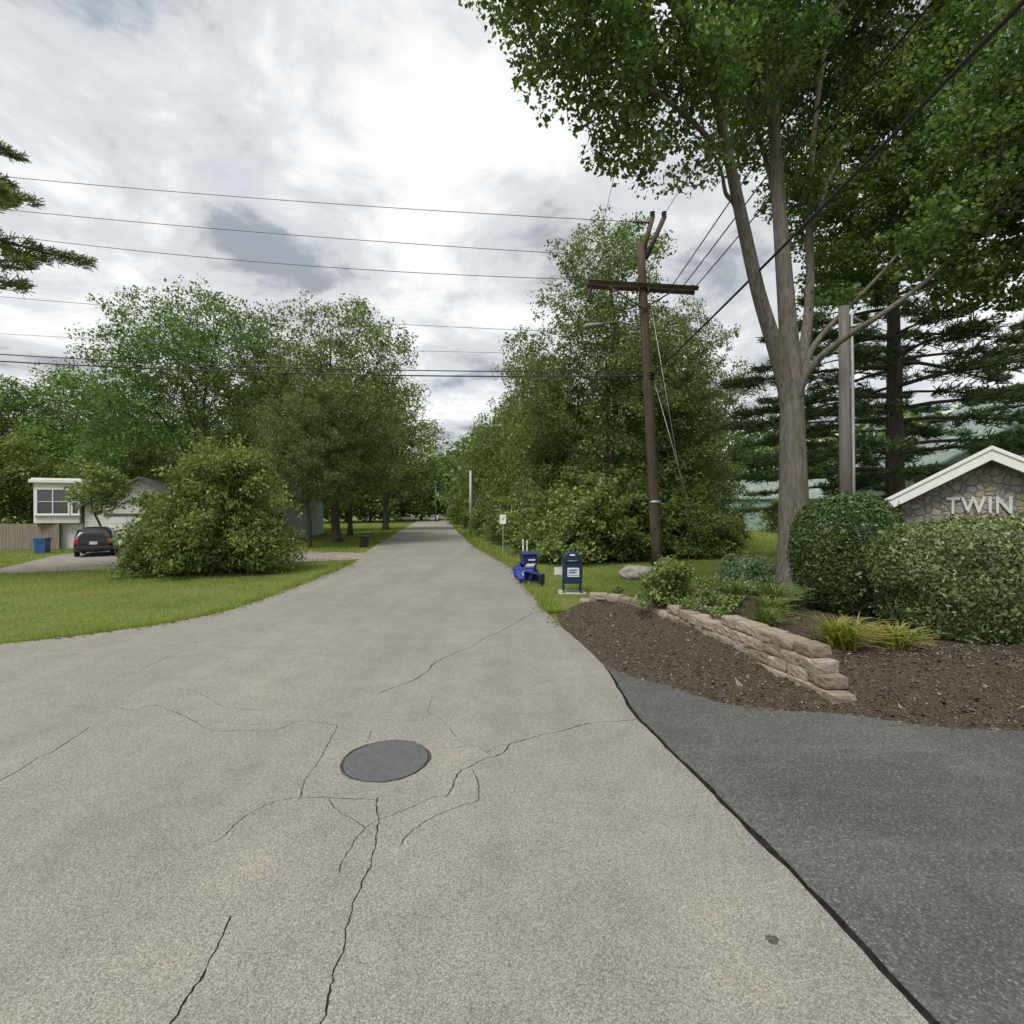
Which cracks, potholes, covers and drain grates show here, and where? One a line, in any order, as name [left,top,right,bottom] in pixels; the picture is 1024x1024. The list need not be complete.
crack [170,917,231,1024]
manhole cover [340,741,432,783]
crack [218,699,640,1024]
